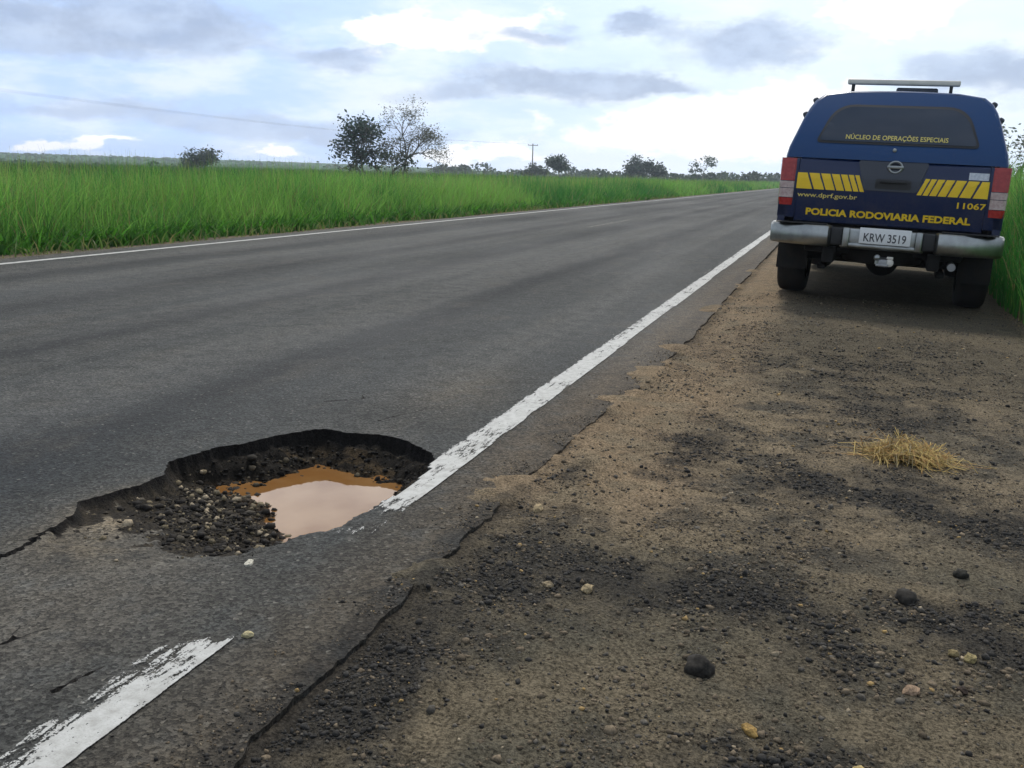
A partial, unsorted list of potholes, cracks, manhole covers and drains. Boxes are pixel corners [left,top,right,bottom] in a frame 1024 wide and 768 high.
crack [50,666,105,694]
crack [0,627,51,645]
pothole [47,429,435,577]
crack [0,527,56,559]
